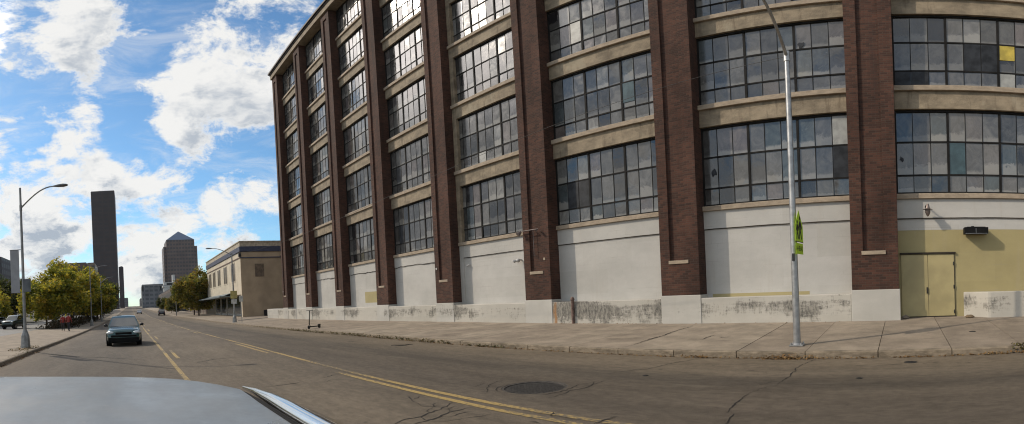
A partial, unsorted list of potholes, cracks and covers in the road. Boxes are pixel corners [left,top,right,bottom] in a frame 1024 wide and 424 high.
manhole cover [501,381,568,394]
crack [475,379,602,398]
crack [726,360,812,424]
crack [395,397,485,424]
